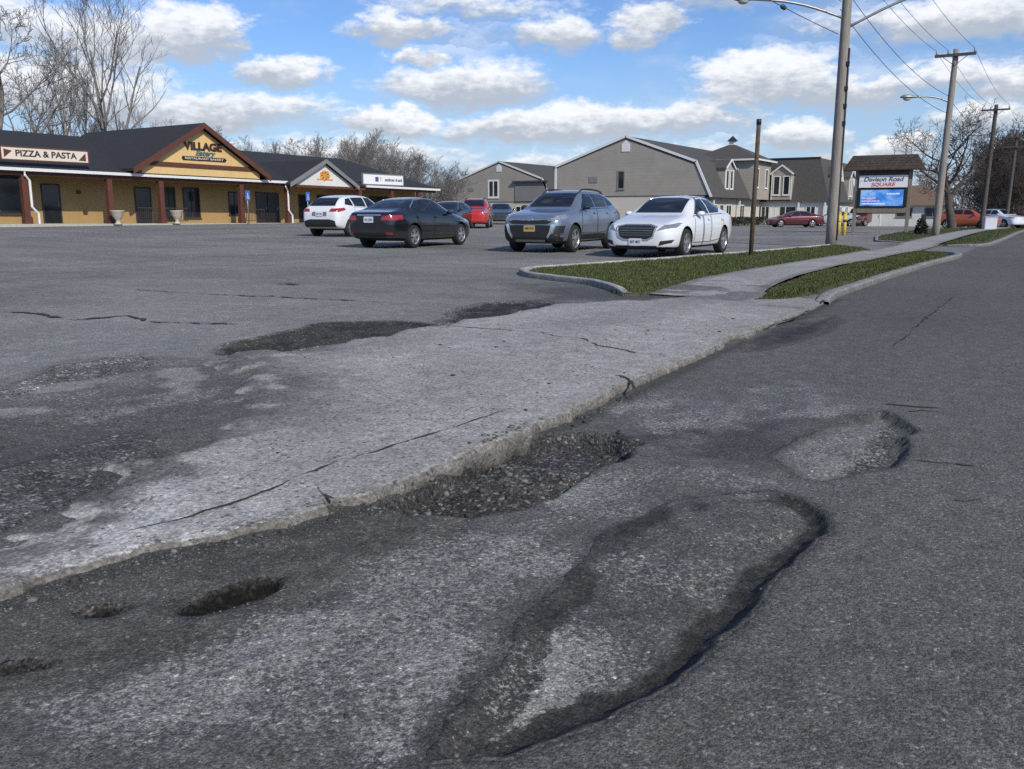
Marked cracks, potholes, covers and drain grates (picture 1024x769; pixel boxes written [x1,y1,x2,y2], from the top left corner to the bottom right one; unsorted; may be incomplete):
pothole [0,657,54,676]
crack [434,324,668,357]
pothole [766,411,917,481]
crack [138,289,377,302]
pothole [72,603,126,619]
pothole [420,490,833,765]
crack [131,410,502,530]
pothole [366,432,642,518]
pothole [174,576,285,617]
crack [23,312,236,324]
